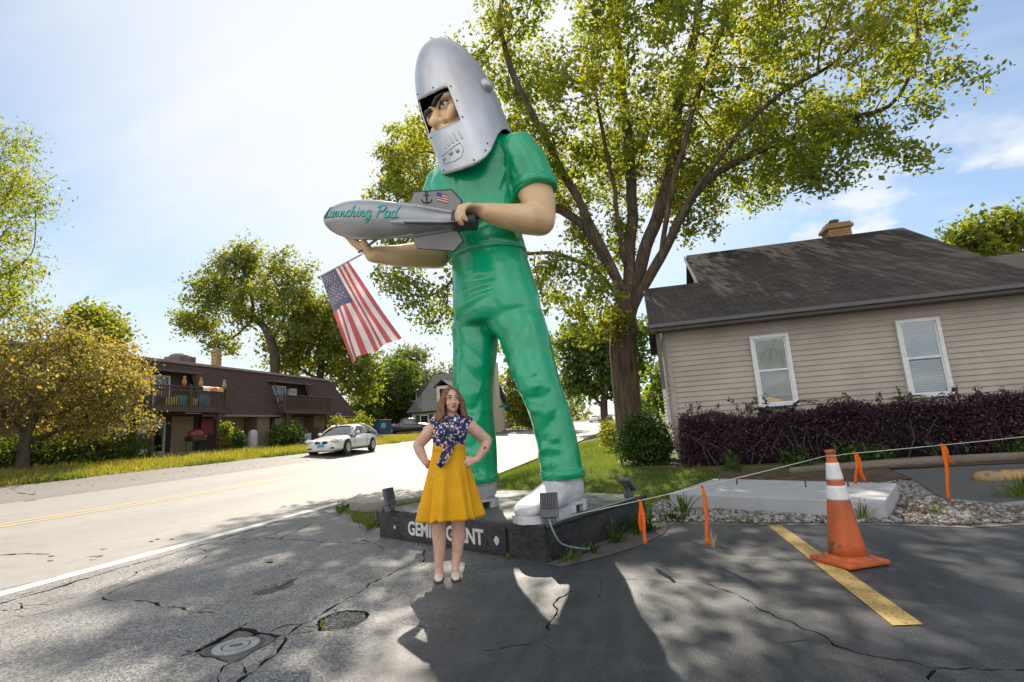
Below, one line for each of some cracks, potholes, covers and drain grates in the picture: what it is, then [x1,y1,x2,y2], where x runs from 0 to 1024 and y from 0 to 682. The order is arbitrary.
crack [704,582,1024,681]
crack [0,549,455,682]
pothole [316,610,369,631]
crack [233,523,384,550]
manhole cover [206,636,265,658]
crack [482,590,576,651]
